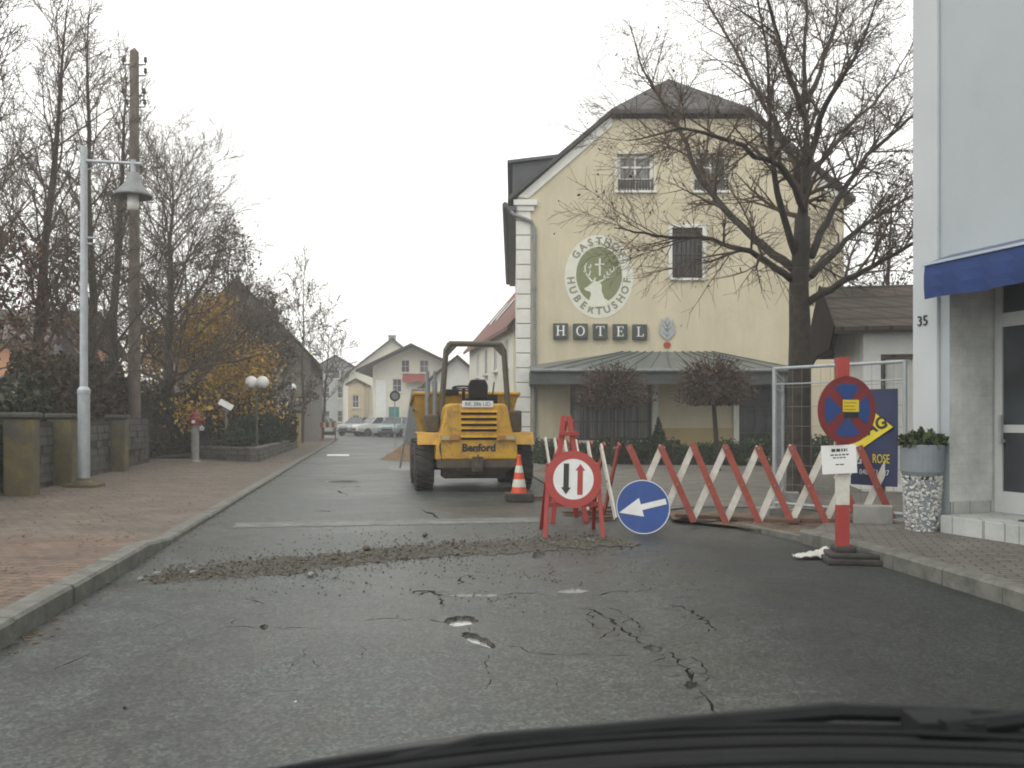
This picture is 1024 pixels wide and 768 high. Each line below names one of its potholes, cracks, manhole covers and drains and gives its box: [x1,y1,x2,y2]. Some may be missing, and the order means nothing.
crack [510,589,739,713]
pothole [460,627,496,649]
pothole [428,616,479,627]
crack [411,575,475,609]
